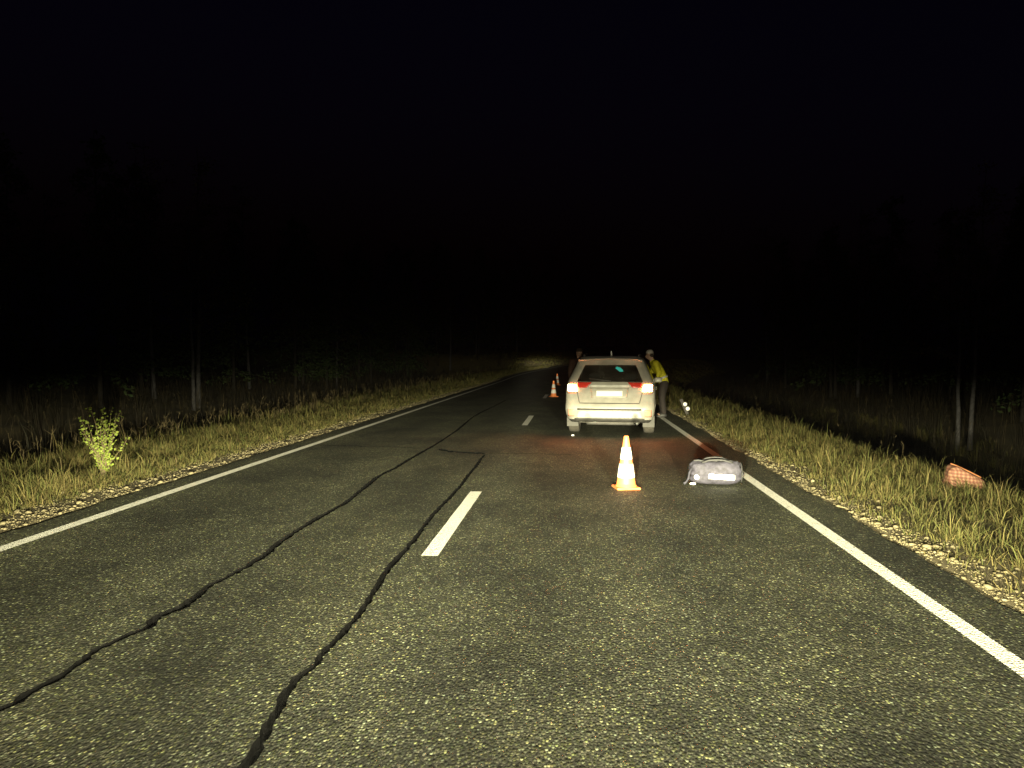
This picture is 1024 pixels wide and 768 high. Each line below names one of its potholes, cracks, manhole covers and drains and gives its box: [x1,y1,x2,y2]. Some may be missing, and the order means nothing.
crack [0,400,528,768]
